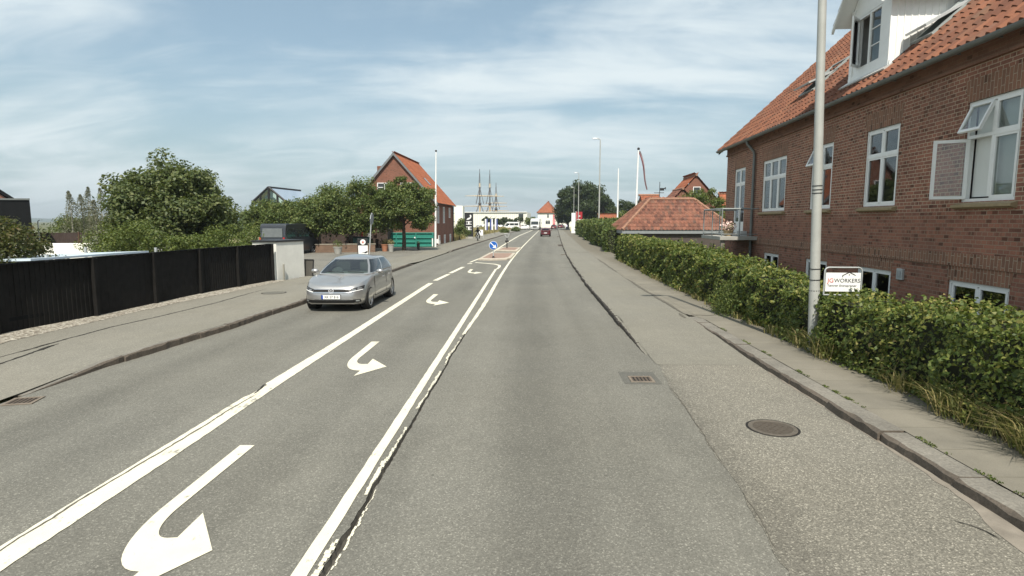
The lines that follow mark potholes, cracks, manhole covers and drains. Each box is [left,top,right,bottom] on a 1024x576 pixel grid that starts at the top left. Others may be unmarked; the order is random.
drain grate [618,372,662,384]
drain grate [0,396,46,406]
manhole cover [745,419,801,437]
